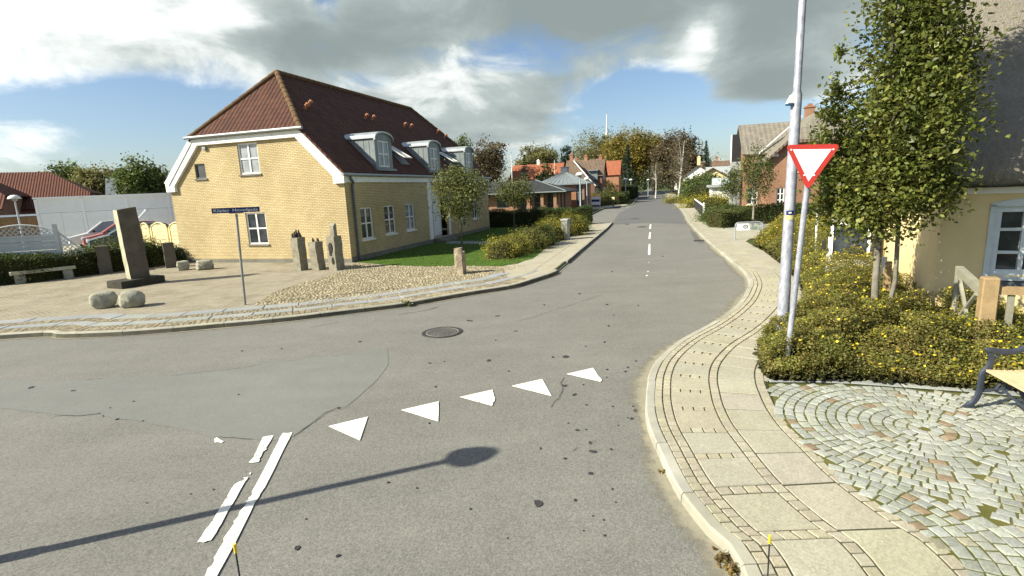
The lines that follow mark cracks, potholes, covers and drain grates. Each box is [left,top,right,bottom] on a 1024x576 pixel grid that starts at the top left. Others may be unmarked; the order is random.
manhole cover [422,327,463,338]
